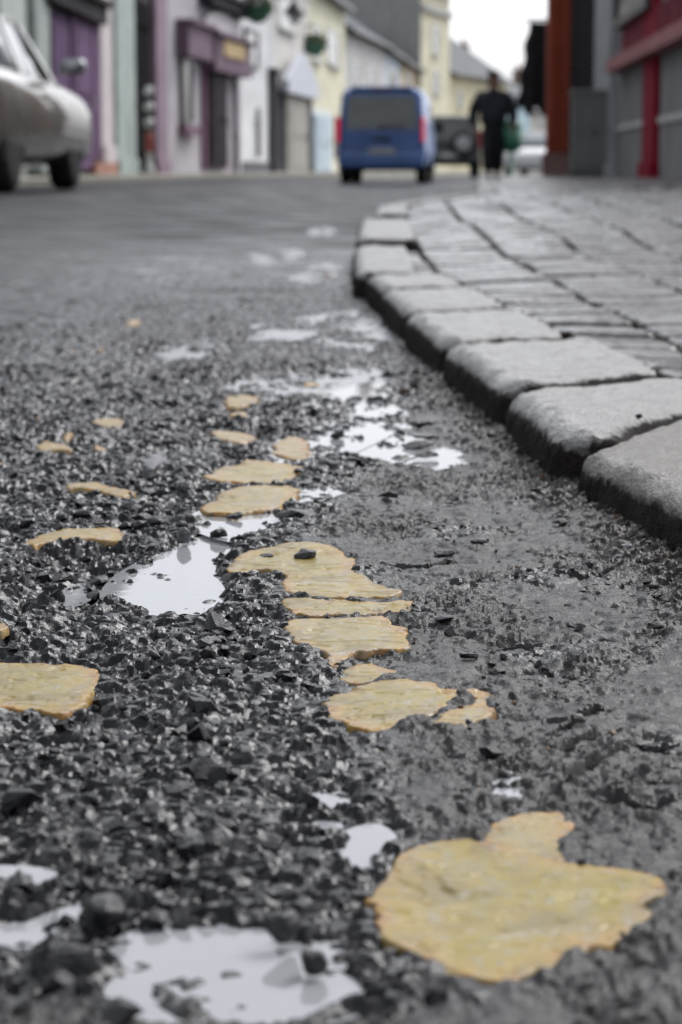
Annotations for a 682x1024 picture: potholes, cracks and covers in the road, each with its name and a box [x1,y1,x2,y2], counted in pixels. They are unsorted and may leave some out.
pothole [209,363,414,395]
pothole [315,325,402,349]
pothole [152,337,230,360]
pothole [82,907,380,1024]
pothole [301,780,354,831]
pothole [325,834,397,869]
